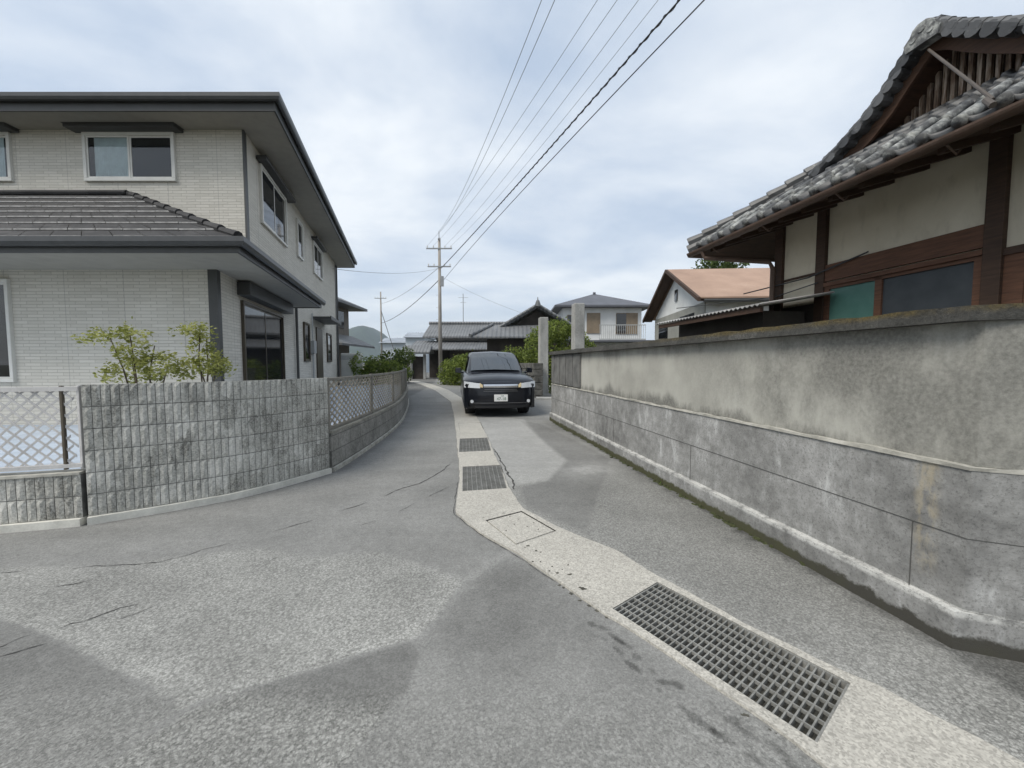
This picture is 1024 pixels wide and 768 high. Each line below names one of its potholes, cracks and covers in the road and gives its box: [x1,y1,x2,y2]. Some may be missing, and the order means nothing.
drain grate [459,438,491,452]
manhole cover [487,511,554,544]
drain grate [614,582,850,743]
crack [0,542,232,587]
crack [494,449,515,489]
crack [274,464,450,531]
drain grate [462,465,507,491]
